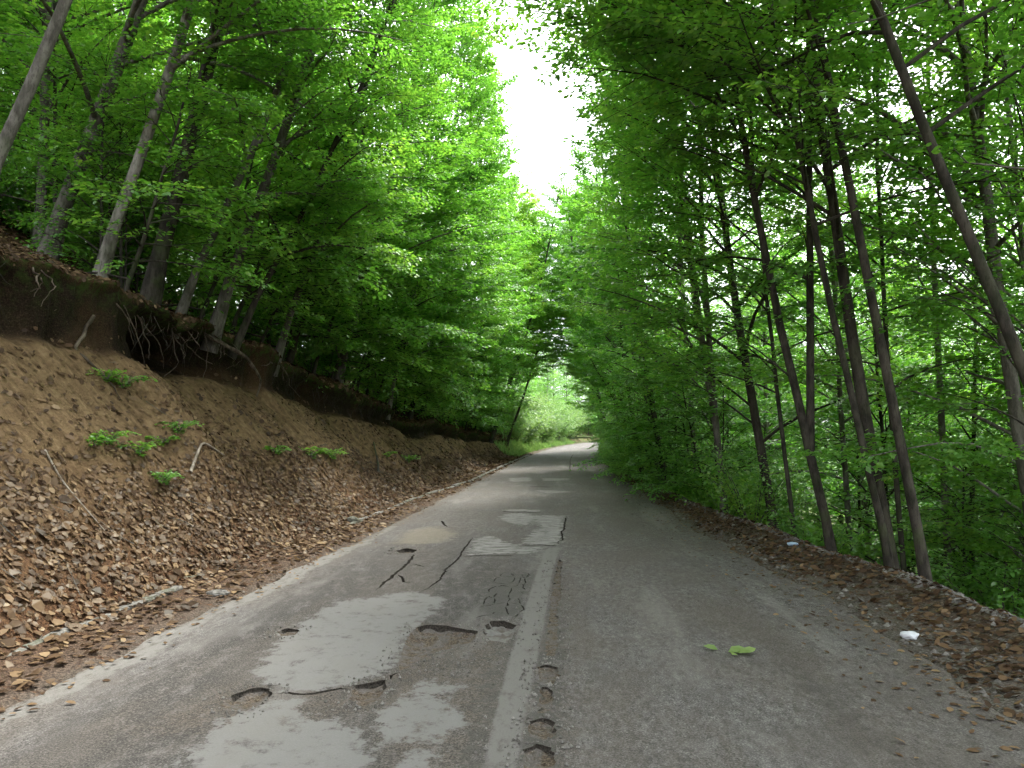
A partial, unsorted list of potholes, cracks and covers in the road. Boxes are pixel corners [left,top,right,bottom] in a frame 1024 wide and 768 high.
crack [376,517,567,713]
pothole [397,625,478,671]
pothole [481,621,517,643]
pothole [217,687,272,711]
pothole [522,744,556,768]
pothole [528,718,557,741]
pothole [277,628,299,636]
pothole [349,680,387,706]
pothole [537,665,561,684]
